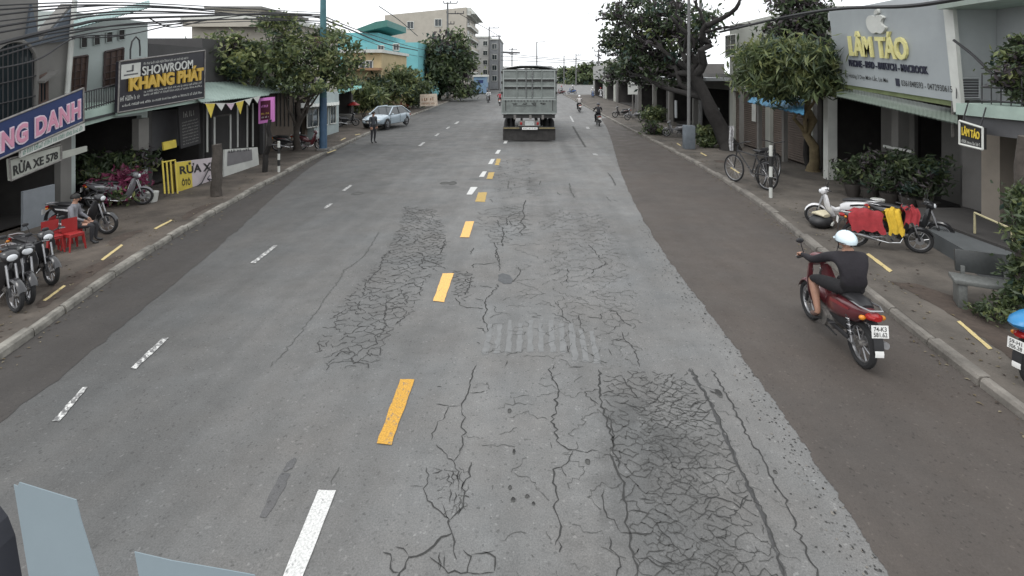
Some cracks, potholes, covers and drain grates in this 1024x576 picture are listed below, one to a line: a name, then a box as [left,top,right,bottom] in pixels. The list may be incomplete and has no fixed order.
crack [270,158,819,576]
